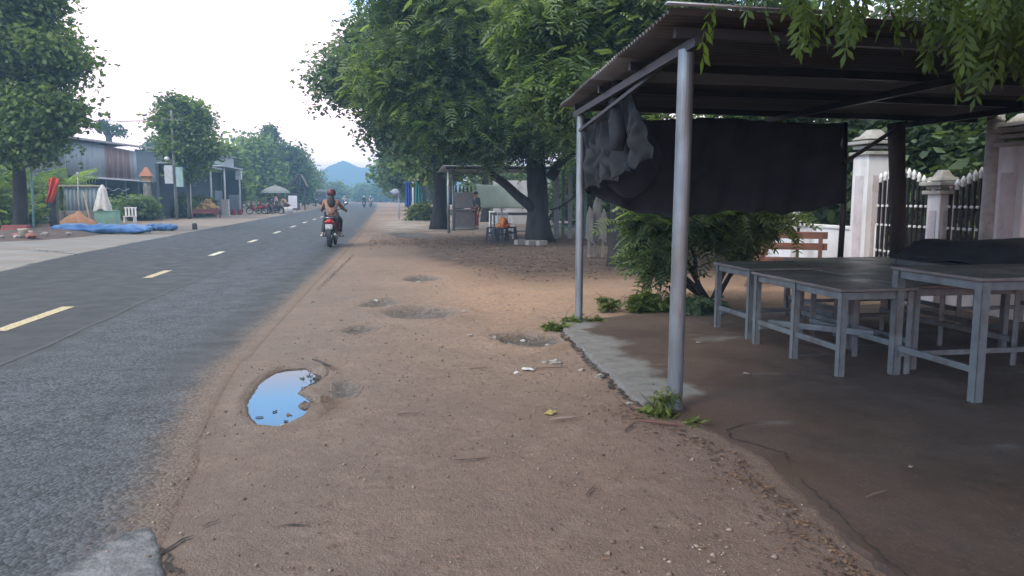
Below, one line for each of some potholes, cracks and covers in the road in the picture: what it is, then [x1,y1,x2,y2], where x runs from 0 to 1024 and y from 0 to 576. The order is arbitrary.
pothole [485,330,566,348]
pothole [241,362,329,427]
pothole [400,274,442,282]
crack [726,422,909,576]
pothole [330,377,364,400]
pothole [336,324,383,335]
pothole [375,305,464,320]
pothole [355,297,403,308]
